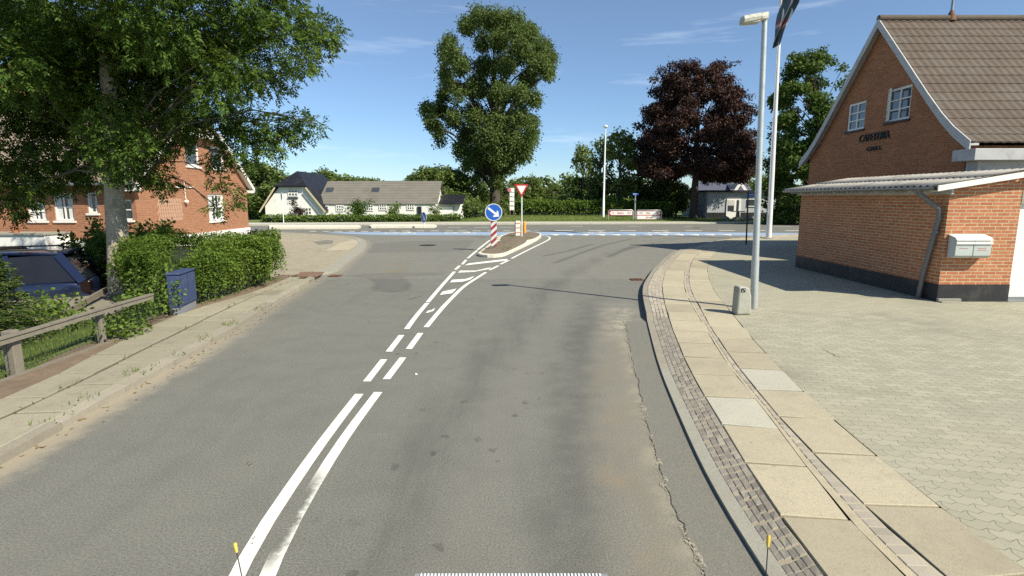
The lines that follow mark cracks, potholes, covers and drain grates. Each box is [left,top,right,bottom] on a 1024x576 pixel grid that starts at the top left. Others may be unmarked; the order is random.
crack [625,321,707,576]
